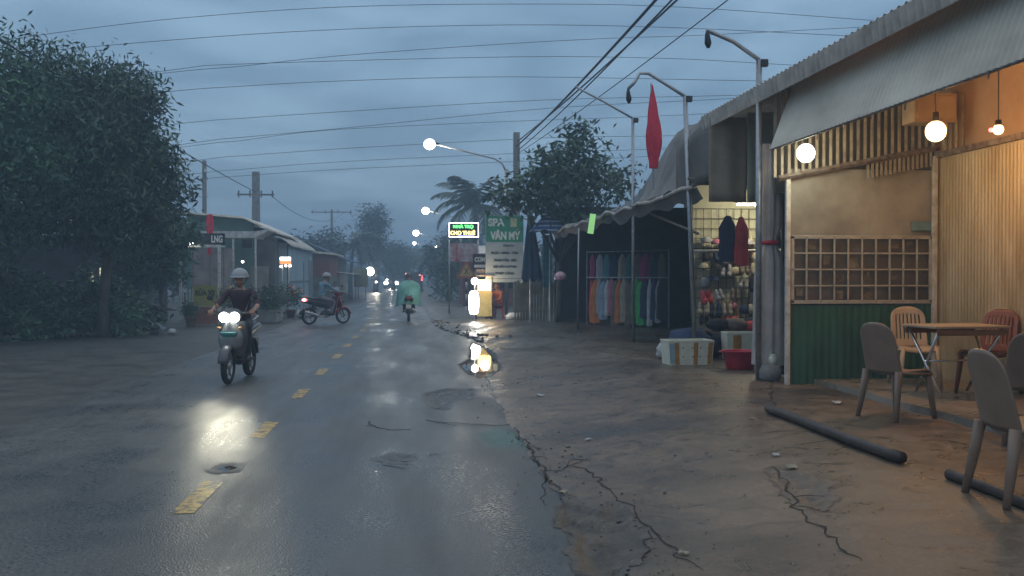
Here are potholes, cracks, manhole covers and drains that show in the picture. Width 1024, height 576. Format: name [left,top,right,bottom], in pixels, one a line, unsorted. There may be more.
crack [775,468,862,559]
pothole [206,462,247,474]
crack [426,419,703,570]
pothole [458,342,505,378]
